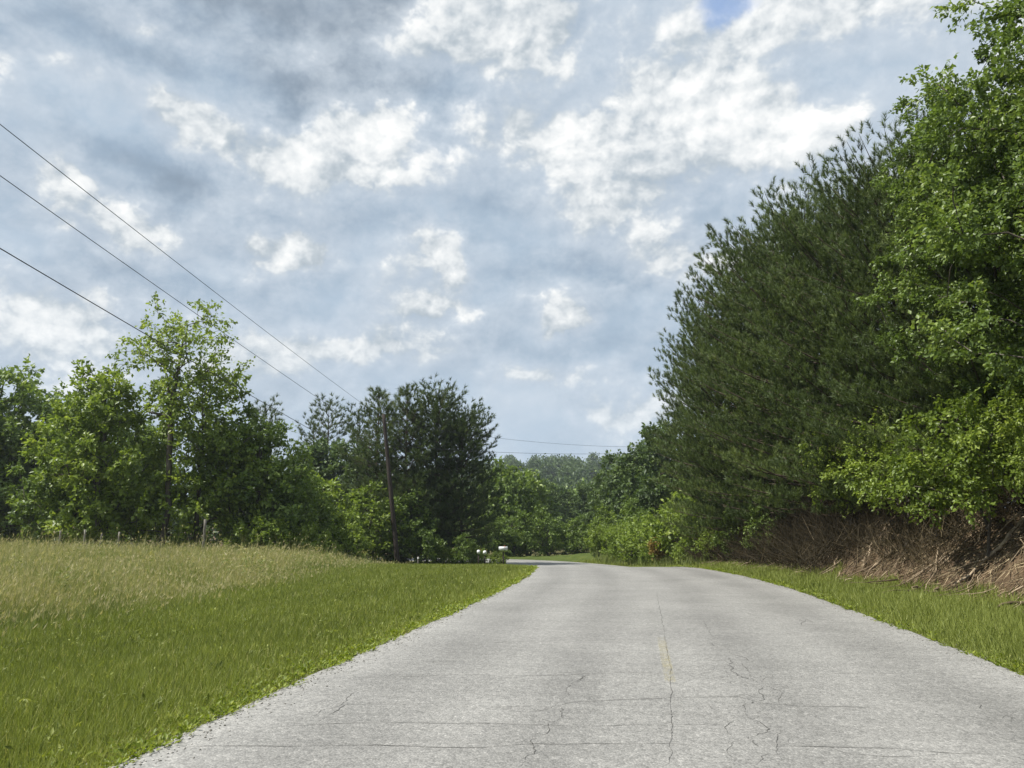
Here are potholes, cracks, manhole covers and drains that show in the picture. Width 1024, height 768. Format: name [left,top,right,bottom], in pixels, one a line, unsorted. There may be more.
crack [204,624,985,762]
